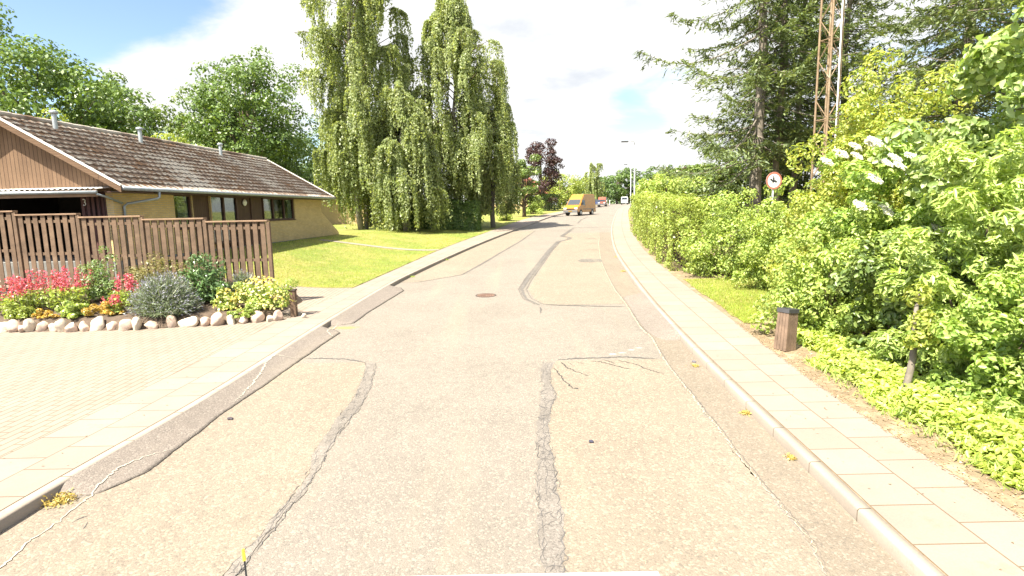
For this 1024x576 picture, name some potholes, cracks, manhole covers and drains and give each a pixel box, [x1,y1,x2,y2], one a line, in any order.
crack [234,354,293,402]
crack [554,236,828,575]
crack [534,362,569,573]
crack [223,363,376,576]
crack [0,448,173,568]
